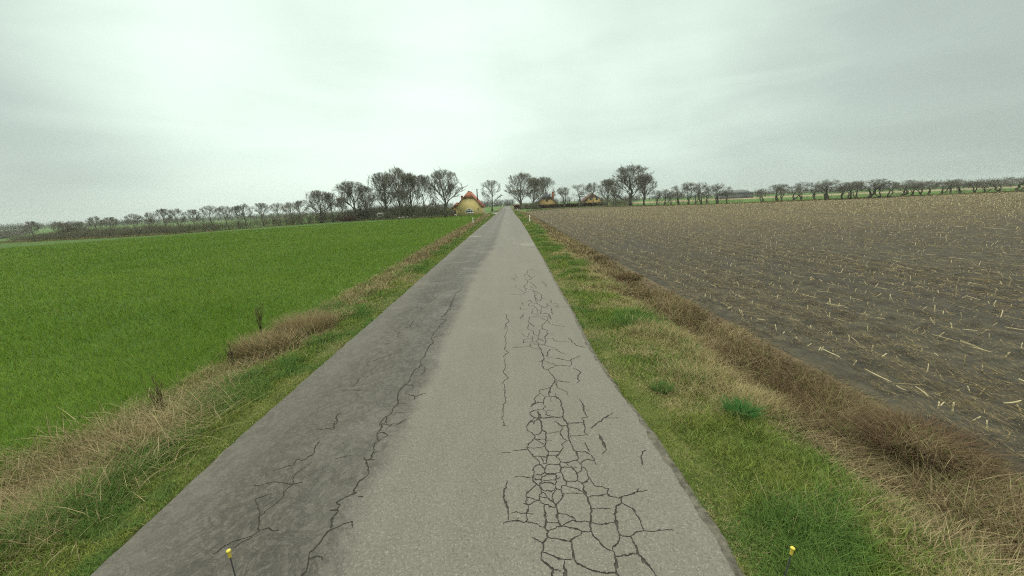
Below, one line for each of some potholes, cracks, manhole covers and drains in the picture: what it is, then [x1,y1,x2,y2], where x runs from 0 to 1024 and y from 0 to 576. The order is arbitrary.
crack [503,272,673,576]
crack [302,286,463,576]
crack [216,414,339,553]
